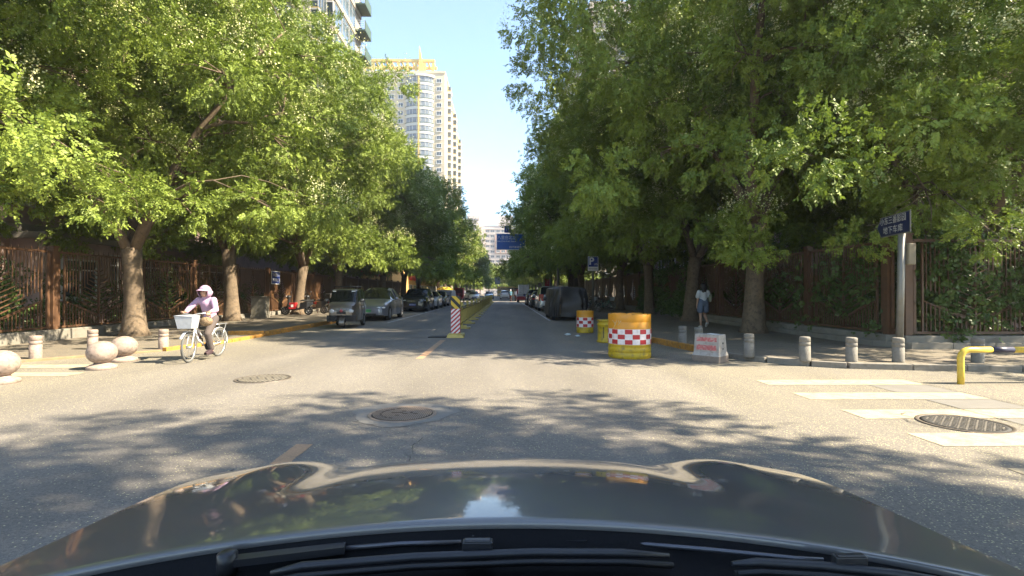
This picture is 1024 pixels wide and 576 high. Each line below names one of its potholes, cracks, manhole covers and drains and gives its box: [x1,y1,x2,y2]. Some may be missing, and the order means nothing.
manhole cover [914,414,1018,434]
manhole cover [367,406,437,423]
manhole cover [233,374,292,384]
